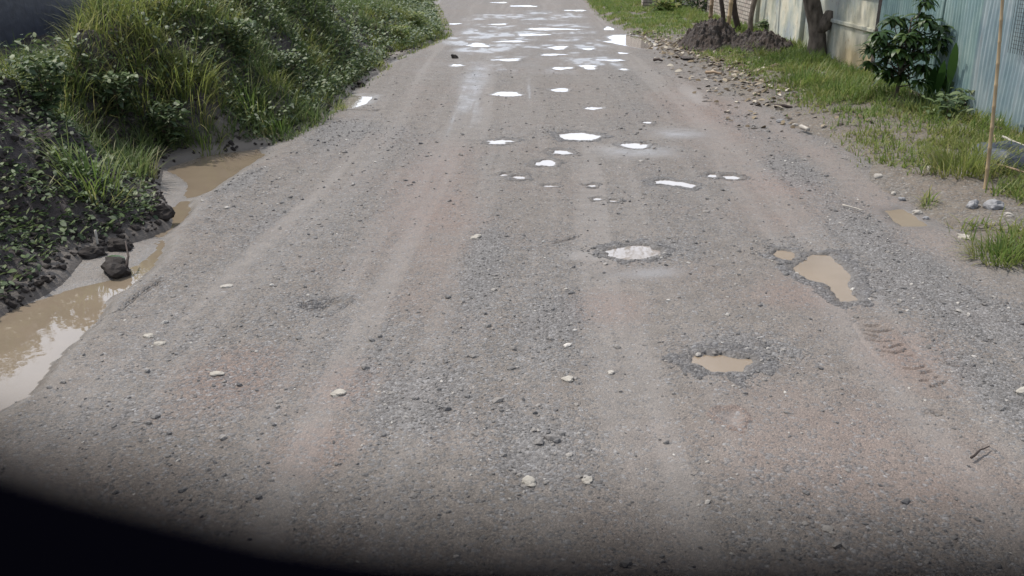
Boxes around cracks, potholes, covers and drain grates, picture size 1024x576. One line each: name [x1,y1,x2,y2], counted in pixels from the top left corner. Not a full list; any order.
pothole [524,156,567,168]
pothole [592,238,680,265]
pothole [546,130,615,142]
pothole [538,147,582,156]
pothole [696,171,722,180]
pothole [718,172,752,182]
pothole [640,176,707,191]
pothole [757,244,802,263]
pothole [477,137,525,146]
pothole [775,248,880,310]
pothole [612,141,657,150]
pothole [661,341,782,389]
